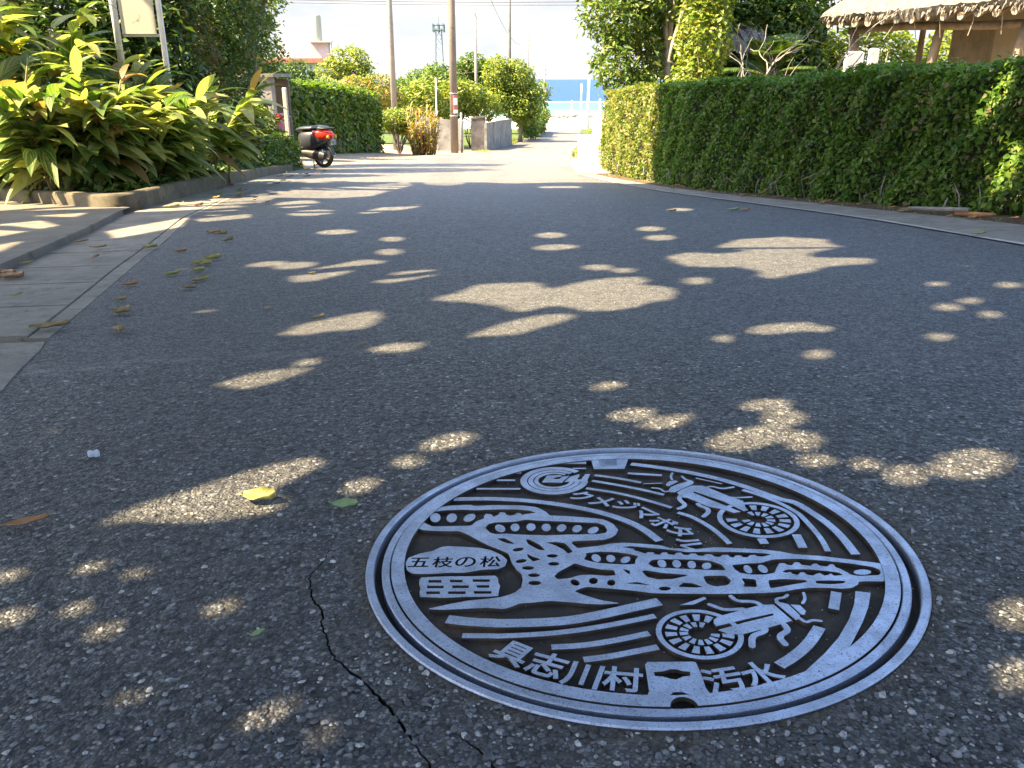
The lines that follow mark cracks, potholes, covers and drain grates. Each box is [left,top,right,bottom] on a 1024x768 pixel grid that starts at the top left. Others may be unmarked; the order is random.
manhole cover [365,448,932,732]
crack [308,526,431,768]
